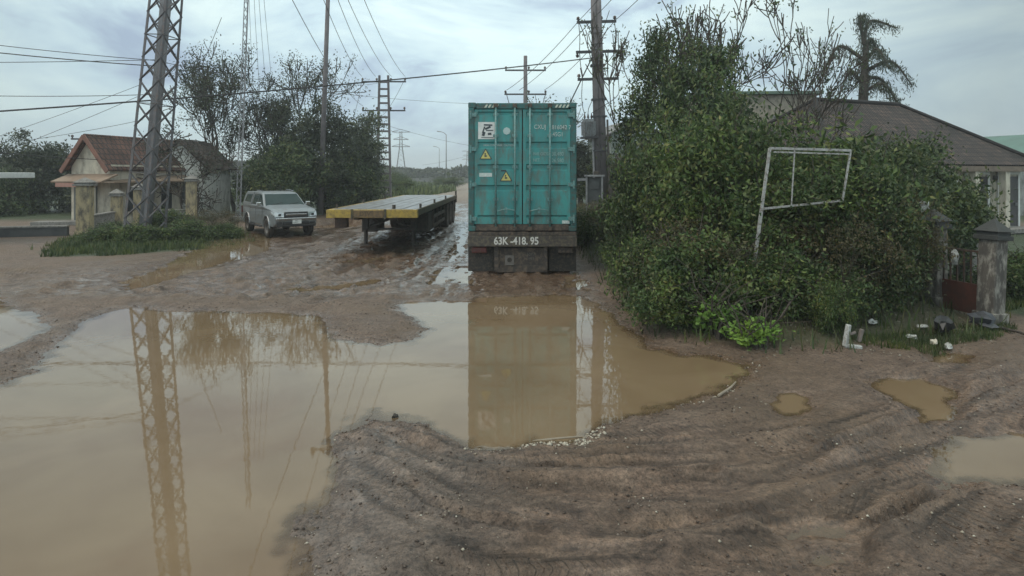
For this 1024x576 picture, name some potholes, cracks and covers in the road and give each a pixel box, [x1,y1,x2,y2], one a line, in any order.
pothole [855,371,973,425]
pothole [757,386,822,418]
pothole [908,423,1024,496]
